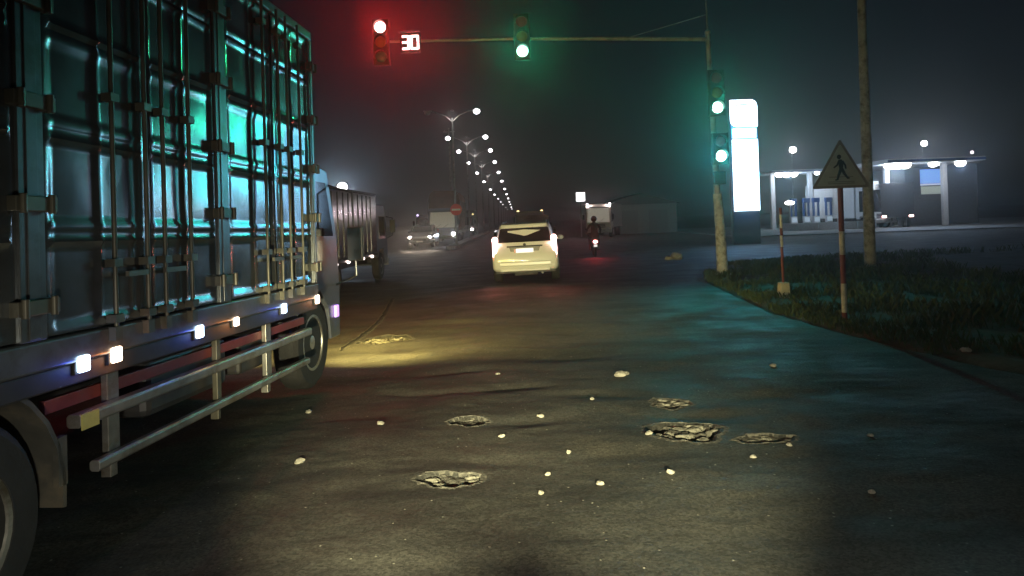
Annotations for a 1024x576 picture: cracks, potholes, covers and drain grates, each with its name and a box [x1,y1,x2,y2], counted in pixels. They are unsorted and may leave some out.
crack [339,298,394,351]
pothole [728,433,800,444]
pothole [639,422,730,445]
pothole [410,470,488,489]
pothole [354,334,416,346]
pothole [444,415,493,428]
pothole [647,397,696,411]
